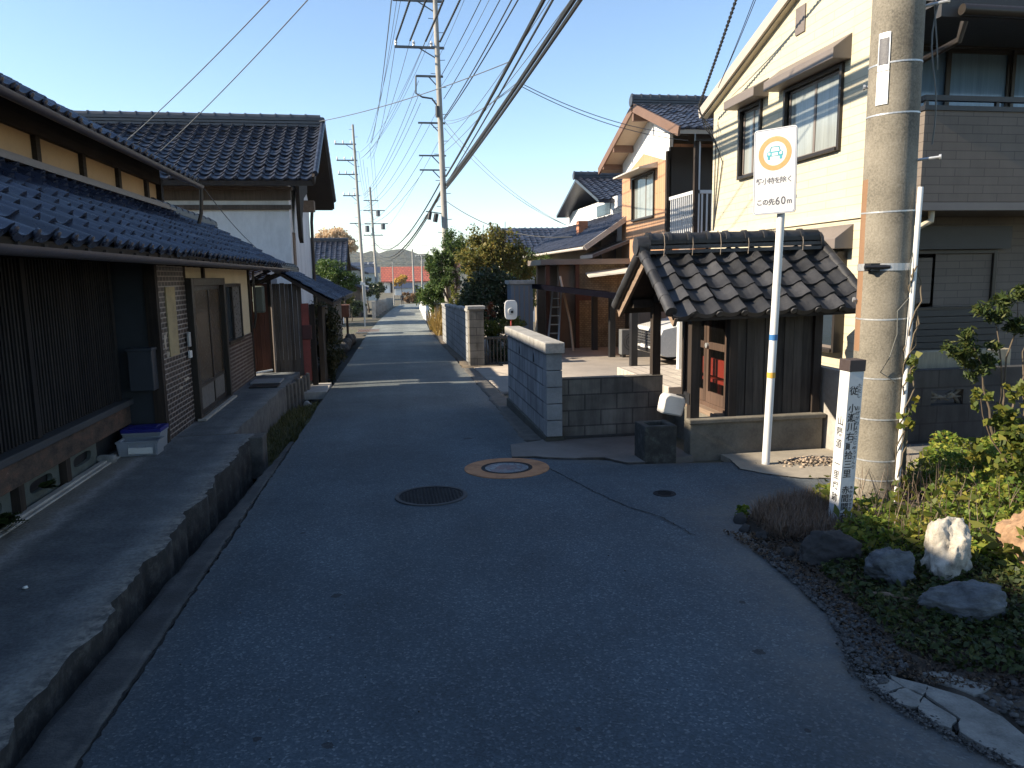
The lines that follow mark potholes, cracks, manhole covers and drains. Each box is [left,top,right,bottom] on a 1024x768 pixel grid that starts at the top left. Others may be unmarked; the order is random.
manhole cover [464,458,549,479]
manhole cover [395,486,467,507]
